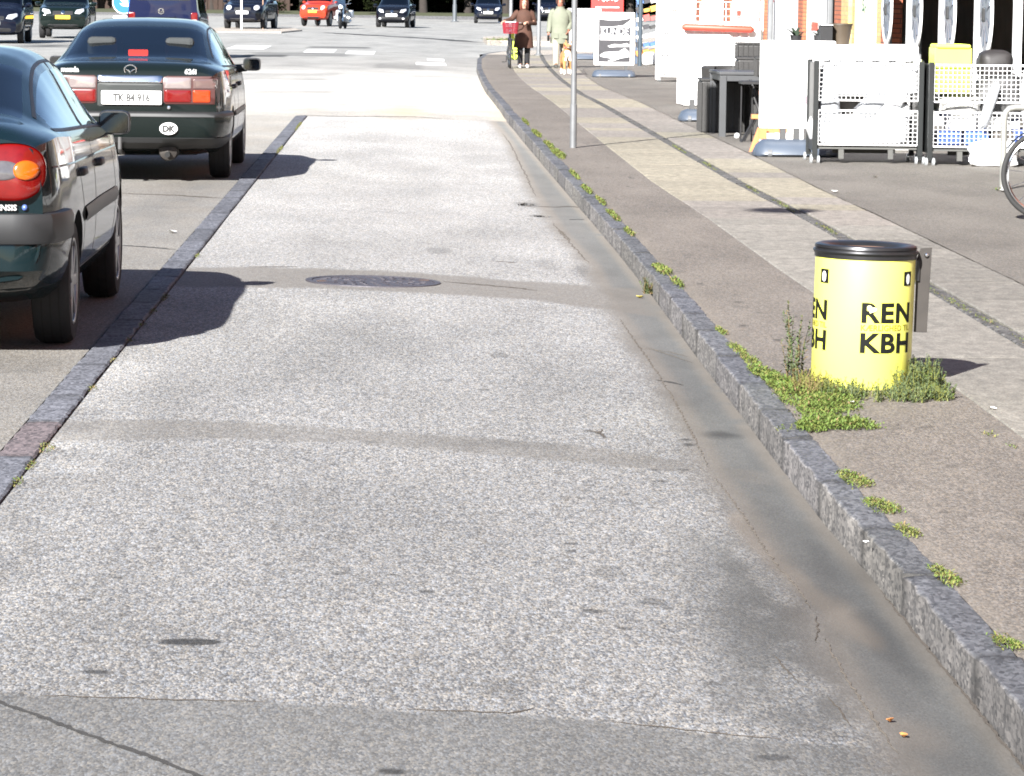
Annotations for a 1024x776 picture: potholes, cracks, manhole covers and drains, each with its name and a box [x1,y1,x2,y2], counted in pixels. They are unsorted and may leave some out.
manhole cover [305,275,441,288]
crack [0,695,779,776]
